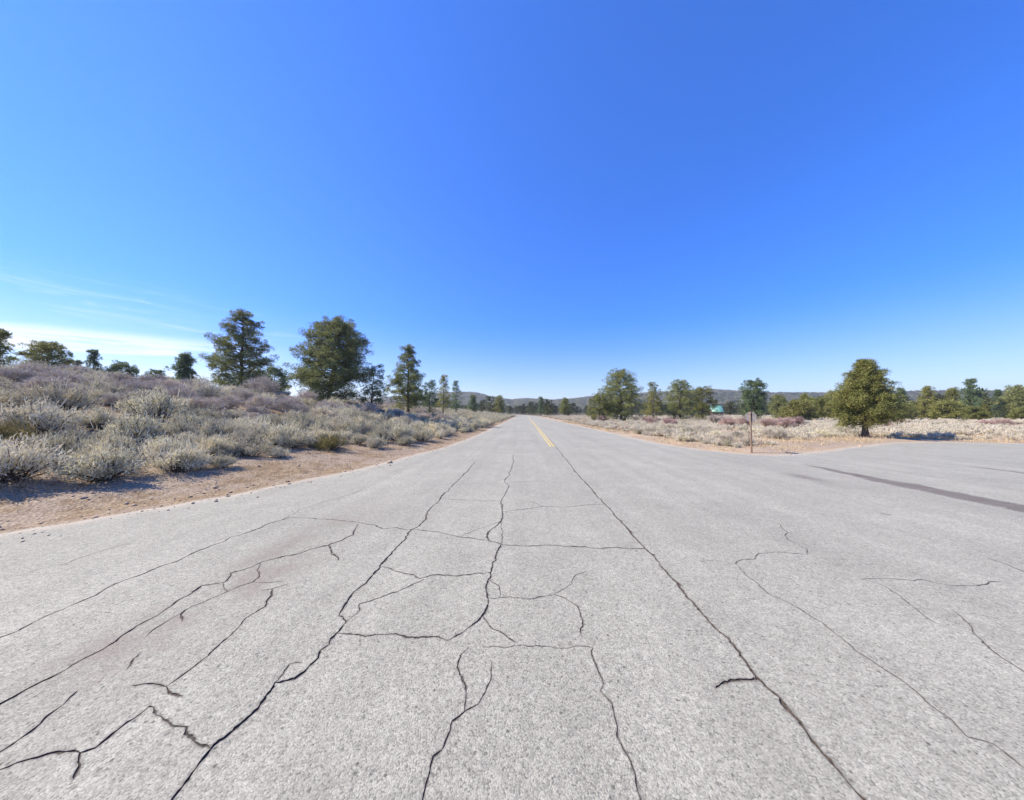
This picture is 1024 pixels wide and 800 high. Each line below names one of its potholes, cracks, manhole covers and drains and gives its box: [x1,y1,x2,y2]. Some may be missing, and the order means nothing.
crack [701,528,1024,768]
crack [0,454,643,800]
